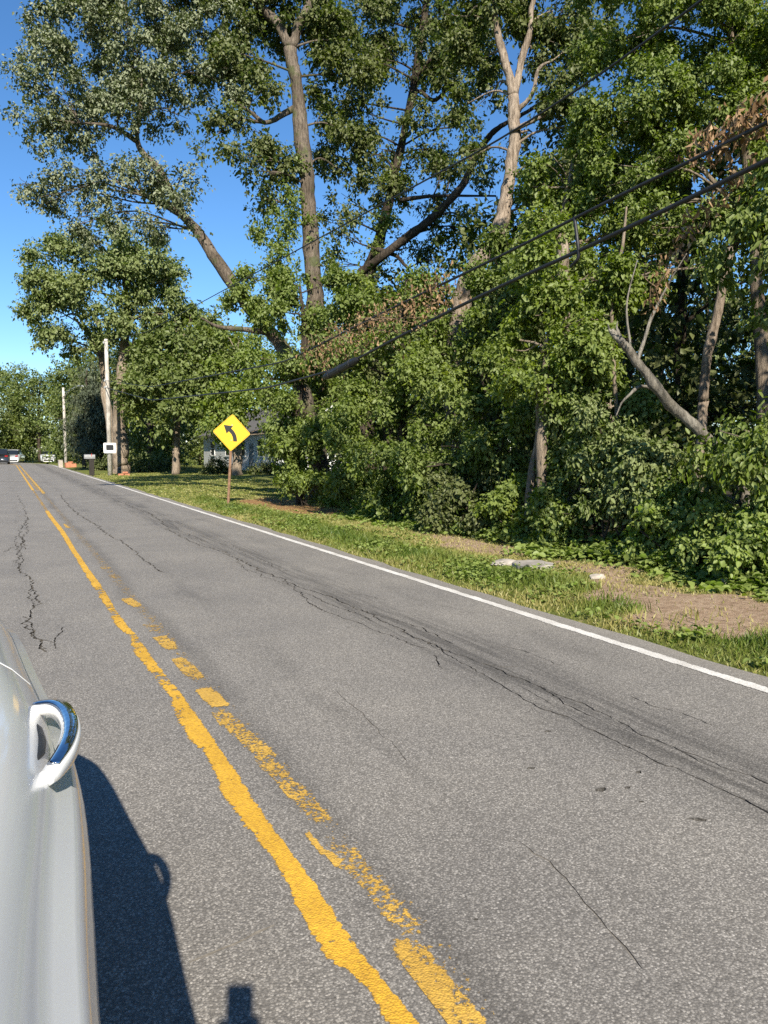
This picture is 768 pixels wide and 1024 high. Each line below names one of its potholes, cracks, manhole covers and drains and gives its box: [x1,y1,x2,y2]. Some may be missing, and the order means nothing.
crack [512,838,642,968]
crack [61,495,162,572]
crack [118,501,768,813]
crack [4,502,63,652]
